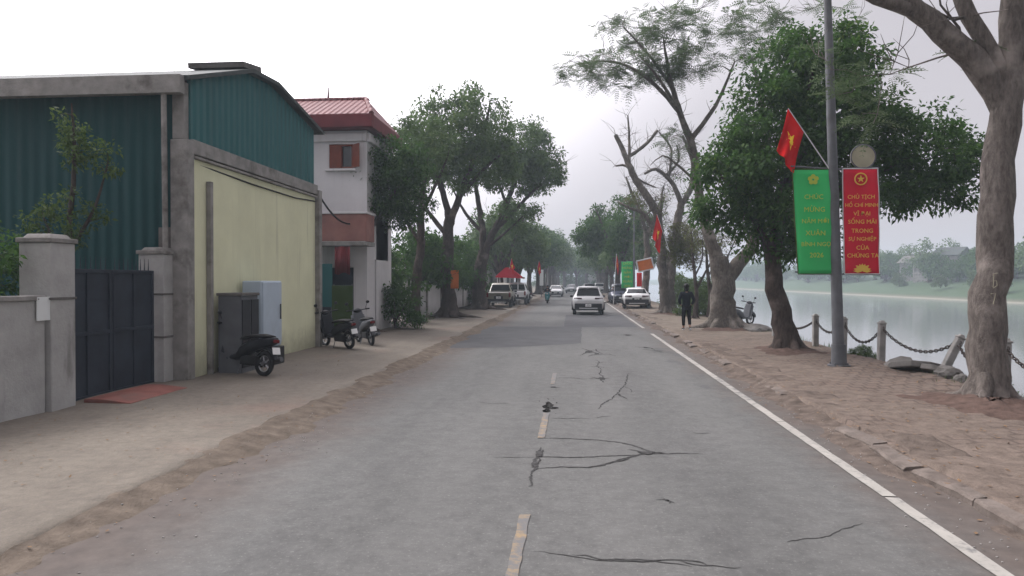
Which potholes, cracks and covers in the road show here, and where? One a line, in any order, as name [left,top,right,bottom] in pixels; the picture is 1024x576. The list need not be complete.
crack [787,523,862,542]
crack [495,438,699,487]
crack [562,349,632,419]
crack [534,551,741,568]
